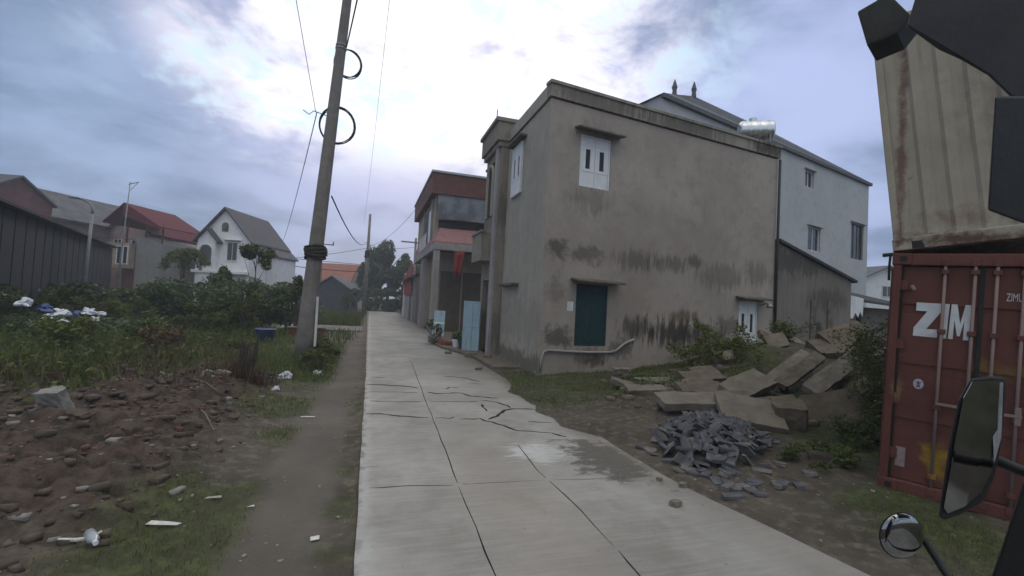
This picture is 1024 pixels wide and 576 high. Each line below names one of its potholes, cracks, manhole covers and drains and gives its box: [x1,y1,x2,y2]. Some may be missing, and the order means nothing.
crack [368,365,640,576]
